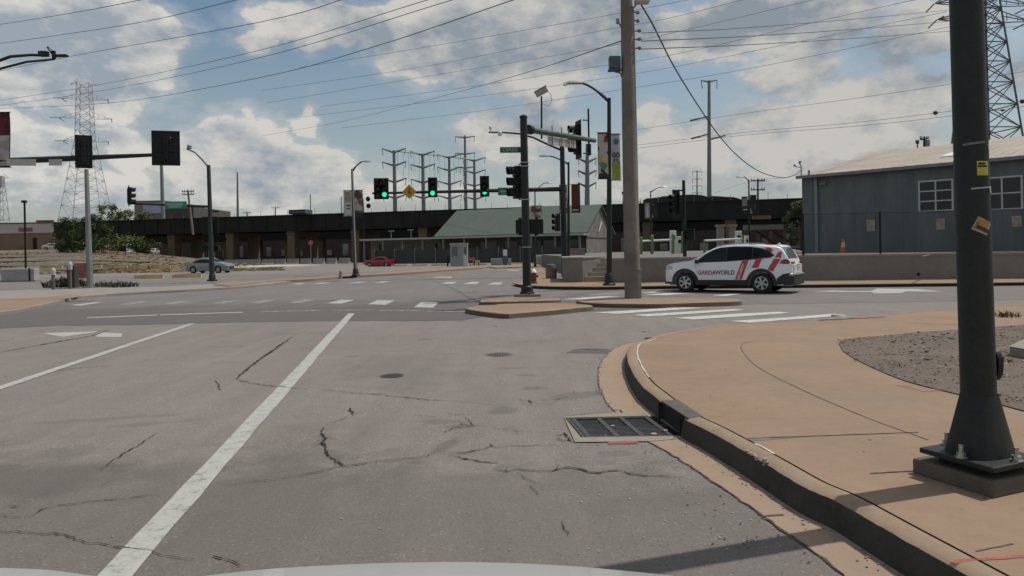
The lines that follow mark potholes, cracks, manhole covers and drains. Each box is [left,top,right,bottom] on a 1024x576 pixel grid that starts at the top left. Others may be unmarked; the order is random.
crack [212,337,682,494]
drain grate [564,400,703,442]
crack [0,491,240,566]
